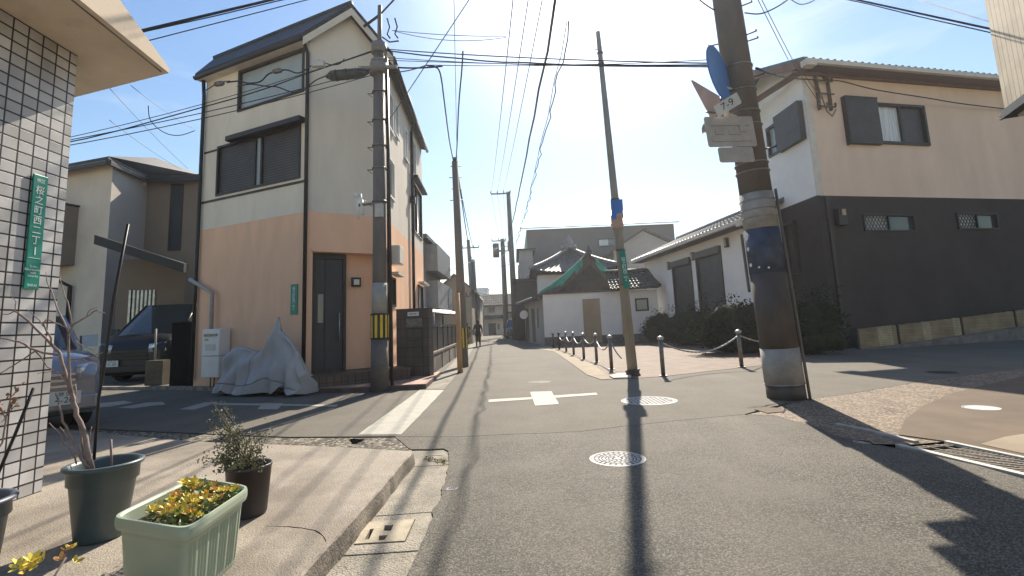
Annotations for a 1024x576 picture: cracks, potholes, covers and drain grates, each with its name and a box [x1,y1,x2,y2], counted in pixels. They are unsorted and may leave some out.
manhole cover [621,396,678,405]
drain grate [895,440,1024,479]
crack [277,526,326,542]
manhole cover [589,451,646,467]
